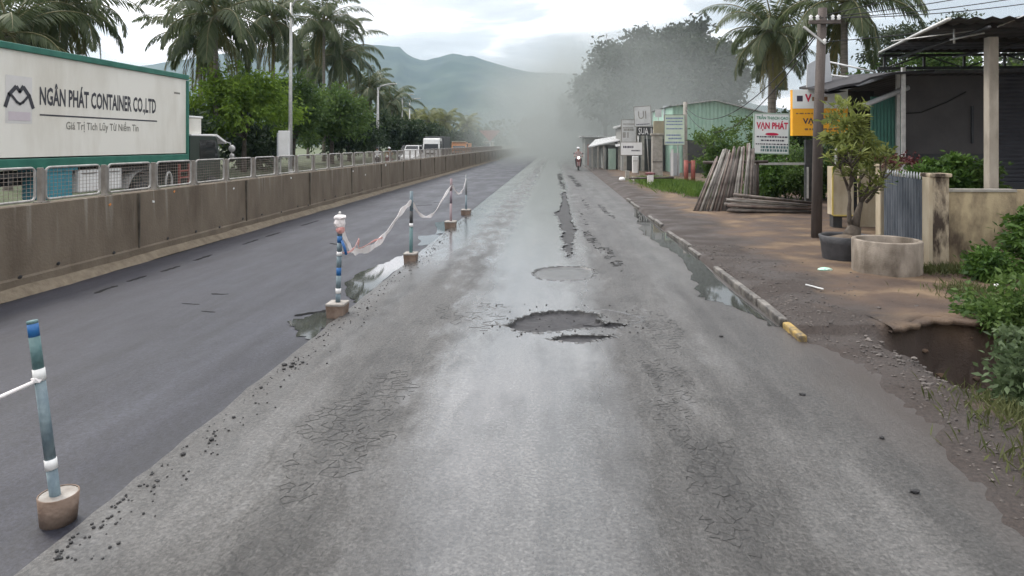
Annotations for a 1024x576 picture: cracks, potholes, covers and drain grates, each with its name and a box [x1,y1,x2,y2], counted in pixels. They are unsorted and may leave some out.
pothole [483,304,646,337]
crack [436,303,504,331]
pothole [539,326,631,345]
crack [641,358,775,558]
pothole [554,192,579,258]
pothole [531,266,600,282]
crack [280,370,420,504]
